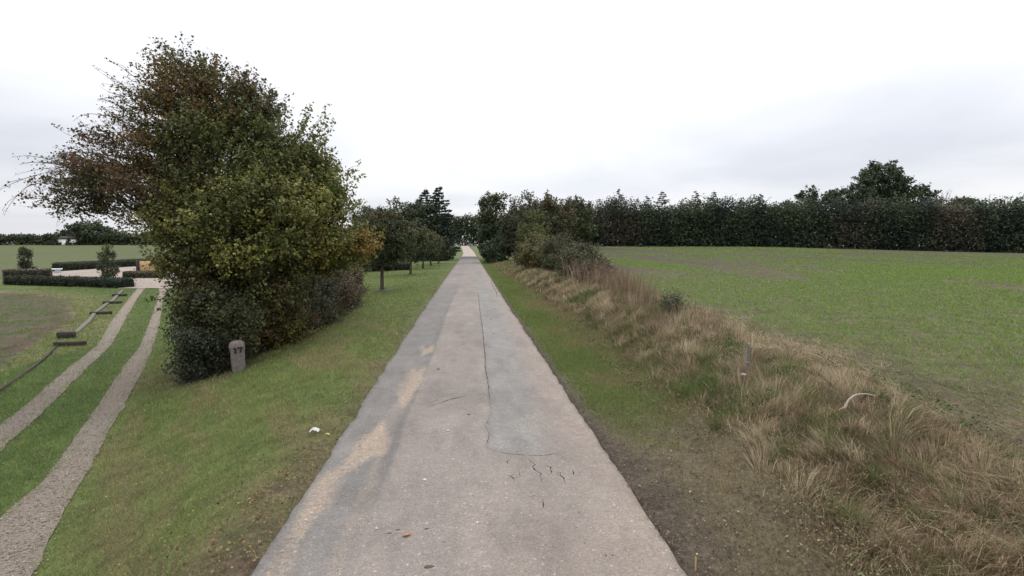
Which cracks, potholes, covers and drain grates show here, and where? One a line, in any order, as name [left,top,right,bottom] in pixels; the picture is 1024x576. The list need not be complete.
crack [479,283,574,482]
